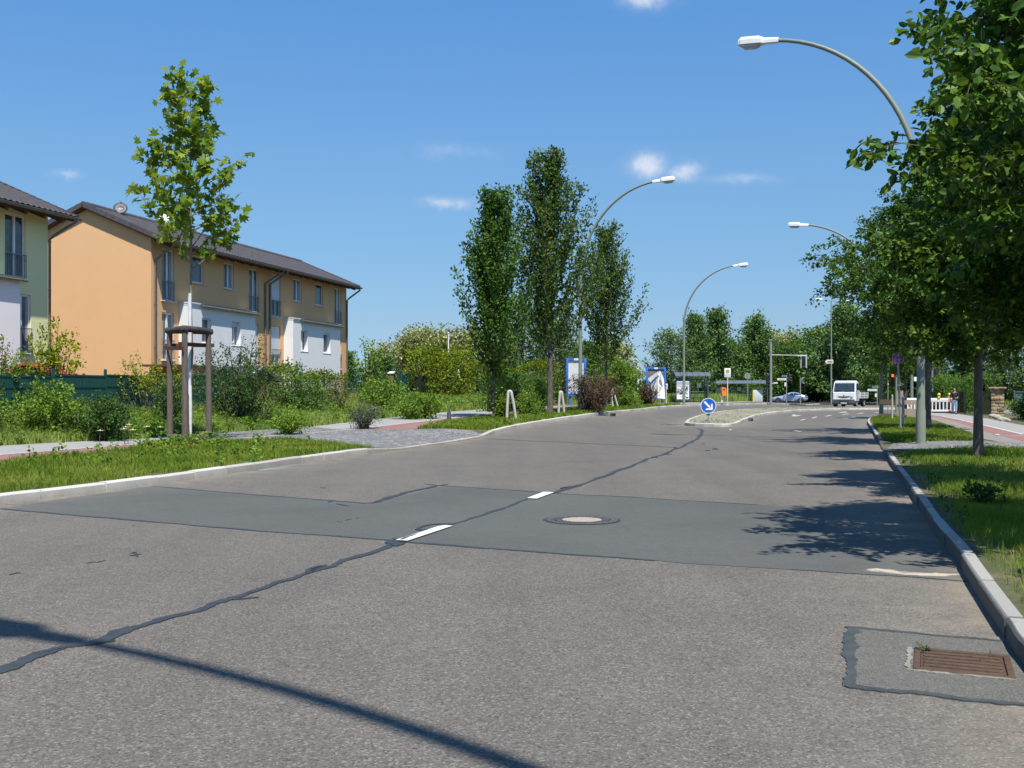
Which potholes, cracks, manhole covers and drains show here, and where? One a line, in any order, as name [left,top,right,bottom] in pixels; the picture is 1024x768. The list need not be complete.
drain grate [904,647,1017,681]
manhole cover [543,515,621,525]
